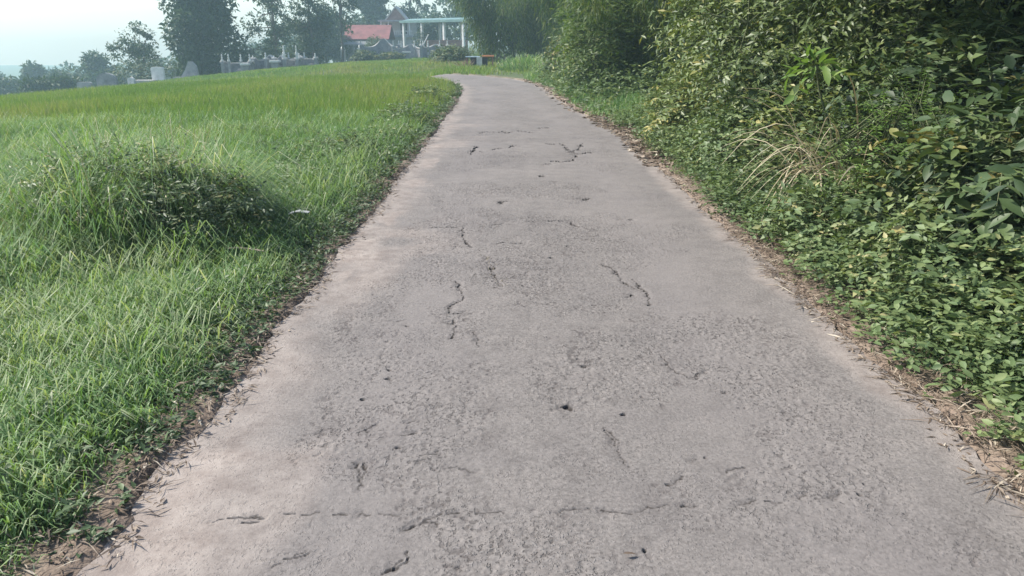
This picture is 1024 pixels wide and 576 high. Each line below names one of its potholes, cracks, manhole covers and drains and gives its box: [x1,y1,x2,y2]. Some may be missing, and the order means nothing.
crack [470,127,592,163]
crack [446,281,481,347]
crack [380,550,411,576]
crack [602,265,652,306]
crack [431,219,632,287]
crack [660,354,708,380]
crack [212,458,841,532]
crack [602,427,630,468]
